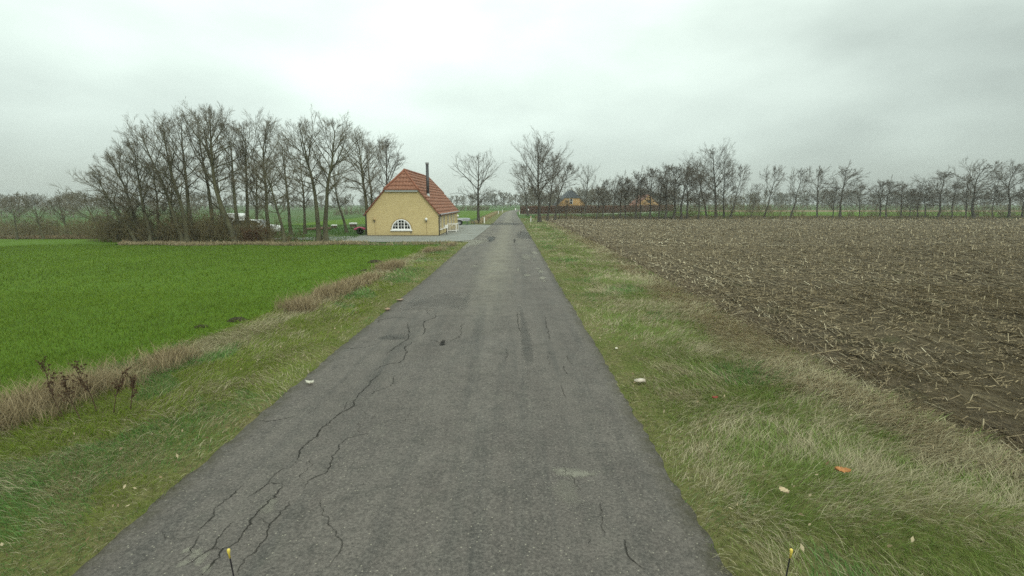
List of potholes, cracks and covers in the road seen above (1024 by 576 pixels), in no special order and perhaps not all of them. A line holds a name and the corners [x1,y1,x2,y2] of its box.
crack [178,317,433,574]
